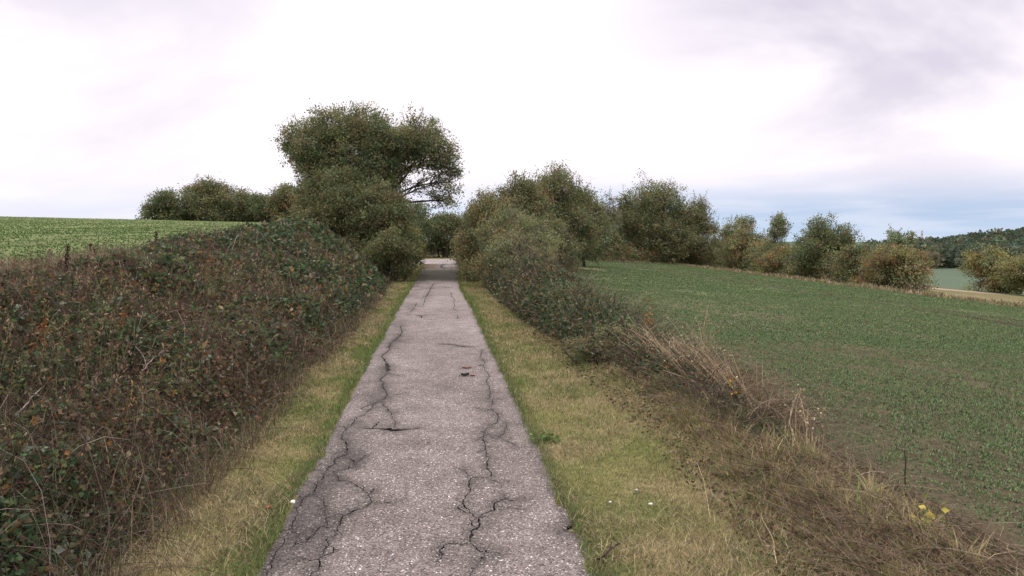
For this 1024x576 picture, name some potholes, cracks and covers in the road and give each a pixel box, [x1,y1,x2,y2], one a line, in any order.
crack [364,421,418,431]
crack [266,326,402,576]
crack [435,344,528,576]
